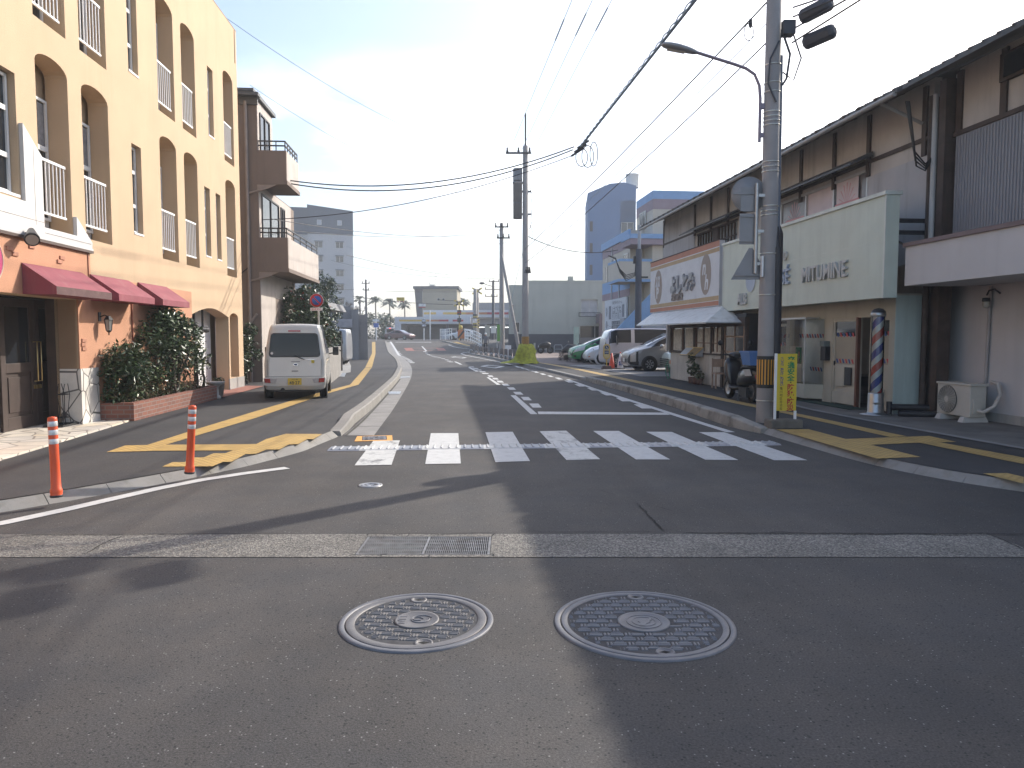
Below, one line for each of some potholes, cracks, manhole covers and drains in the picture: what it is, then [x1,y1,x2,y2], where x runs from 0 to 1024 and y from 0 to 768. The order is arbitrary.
drain grate [355,537,492,555]
manhole cover [338,593,493,654]
crack [545,503,672,532]
manhole cover [554,591,737,663]
